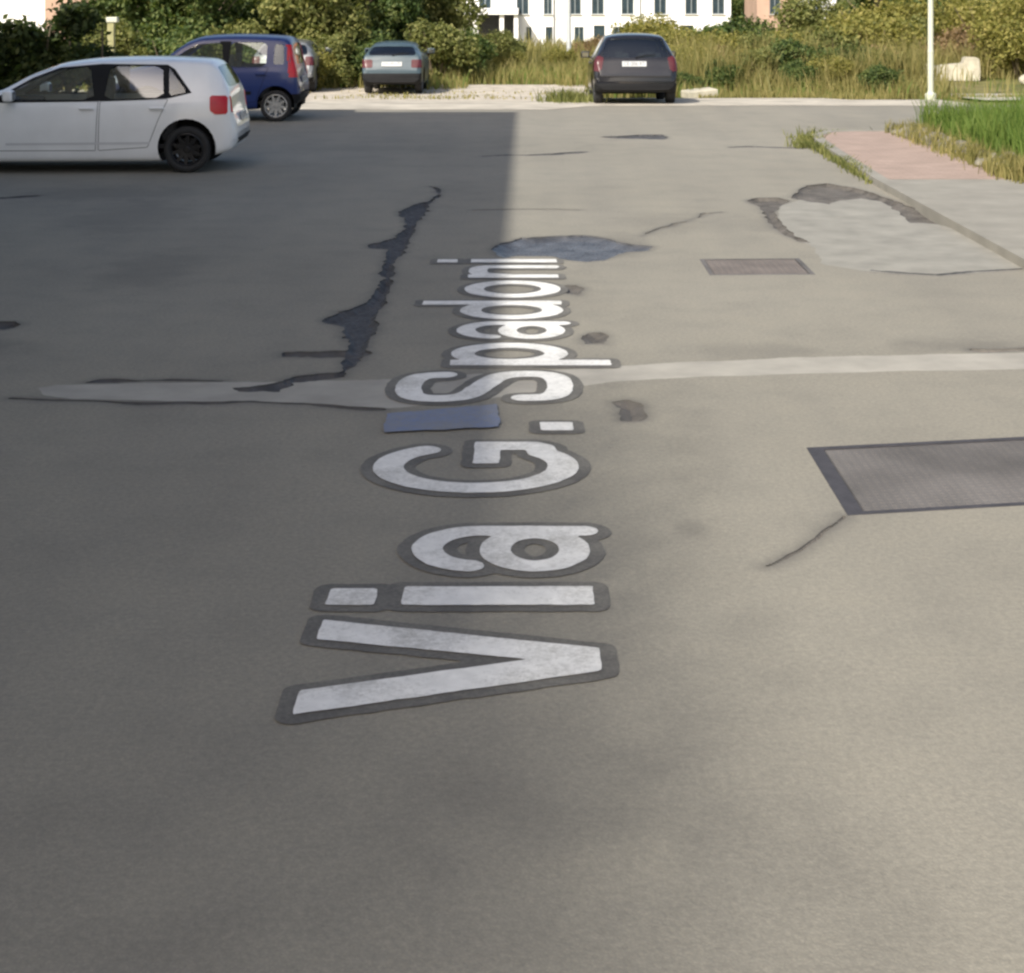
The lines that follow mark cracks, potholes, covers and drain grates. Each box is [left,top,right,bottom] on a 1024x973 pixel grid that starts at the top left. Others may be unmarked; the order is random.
manhole cover [807,437,1024,523]
crack [766,516,846,567]
pothole [565,285,584,295]
manhole cover [700,258,815,275]
crack [8,186,441,411]
pothole [581,332,609,344]
crack [645,212,720,235]
pothole [612,400,648,421]
pothole [0,321,20,330]
